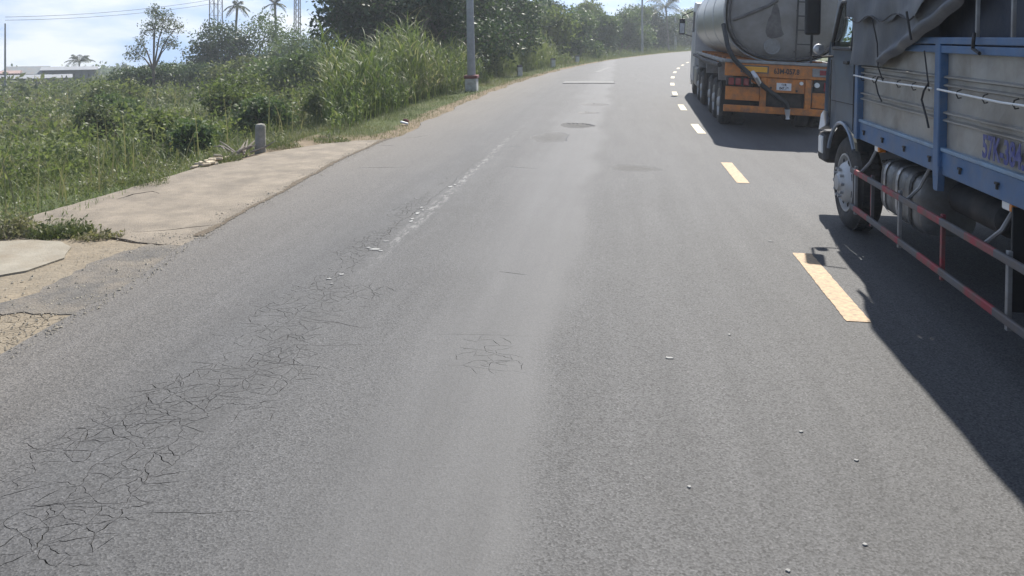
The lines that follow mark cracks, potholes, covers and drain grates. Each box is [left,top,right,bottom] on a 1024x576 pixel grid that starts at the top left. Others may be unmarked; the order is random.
crack [0,165,472,567]
crack [421,333,537,374]
